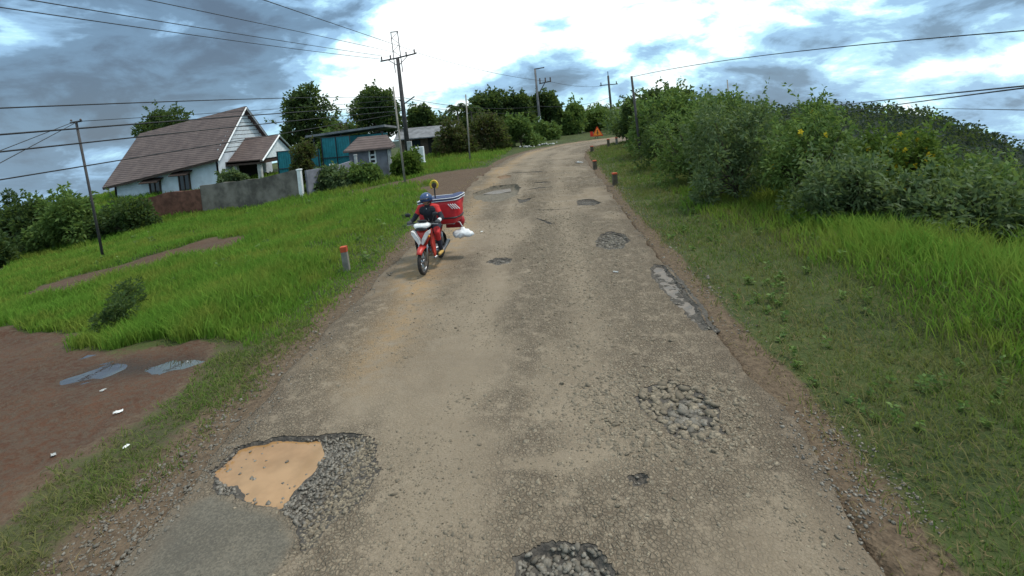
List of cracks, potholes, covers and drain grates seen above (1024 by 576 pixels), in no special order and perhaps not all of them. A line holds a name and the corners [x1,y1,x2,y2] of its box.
pothole [627,473,649,487]
pothole [634,380,726,442]
pothole [208,432,383,551]
pothole [650,264,720,333]
pothole [486,257,512,265]
pothole [512,540,616,576]
pothole [595,231,631,250]
pothole [473,184,521,202]
